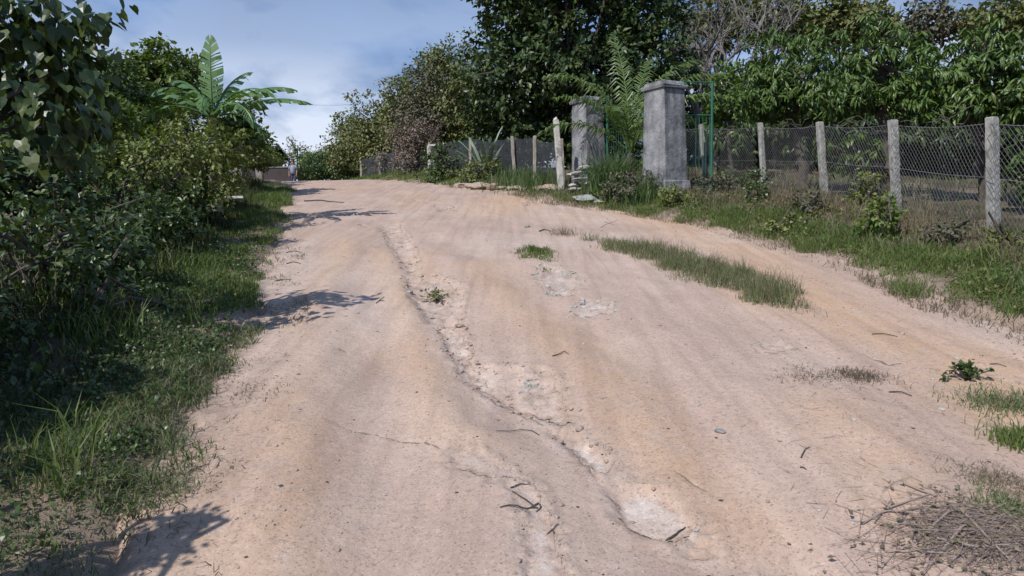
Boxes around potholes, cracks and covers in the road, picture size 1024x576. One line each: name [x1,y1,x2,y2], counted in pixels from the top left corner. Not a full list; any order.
crack [478,381,596,480]
pothole [599,482,701,547]
pothole [568,297,618,318]
crack [327,419,440,449]
pothole [453,361,582,426]
pothole [534,262,585,297]
